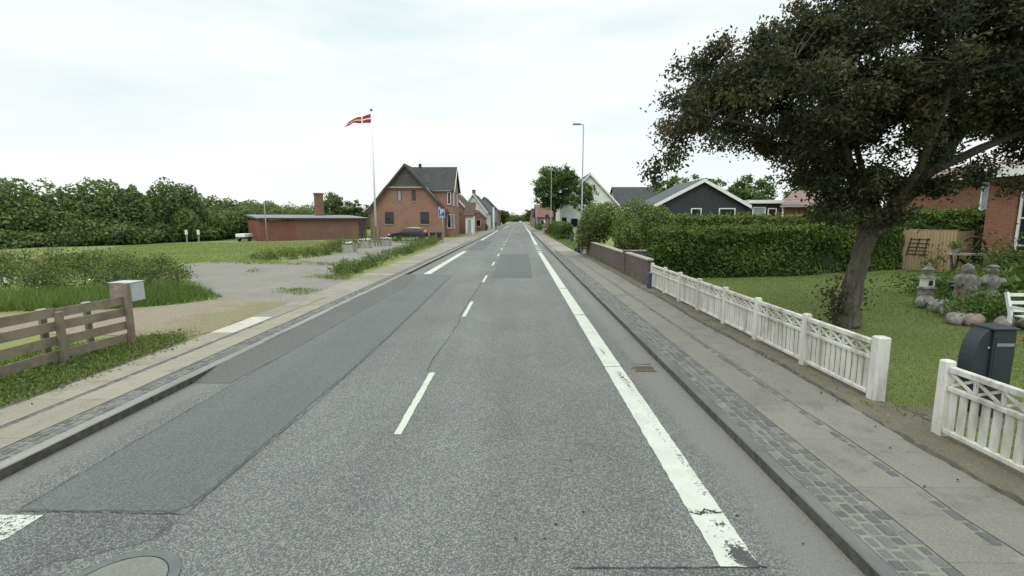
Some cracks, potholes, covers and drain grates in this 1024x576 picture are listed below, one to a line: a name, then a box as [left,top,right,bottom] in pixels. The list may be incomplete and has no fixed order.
crack [427,283,481,371]
manhole cover [75,549,181,576]
